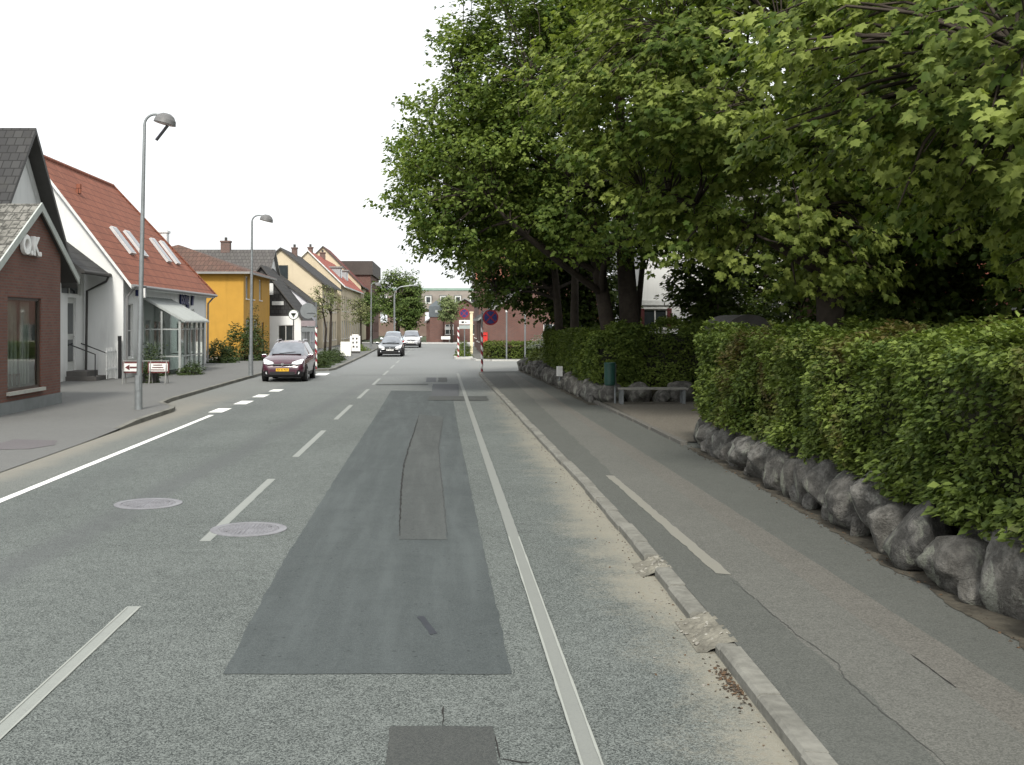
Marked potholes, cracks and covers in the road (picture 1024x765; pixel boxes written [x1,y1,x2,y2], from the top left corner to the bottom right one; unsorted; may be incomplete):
crack [733,581,946,765]
manhole cover [114,498,182,509]
manhole cover [210,522,287,537]
crack [399,416,419,533]
